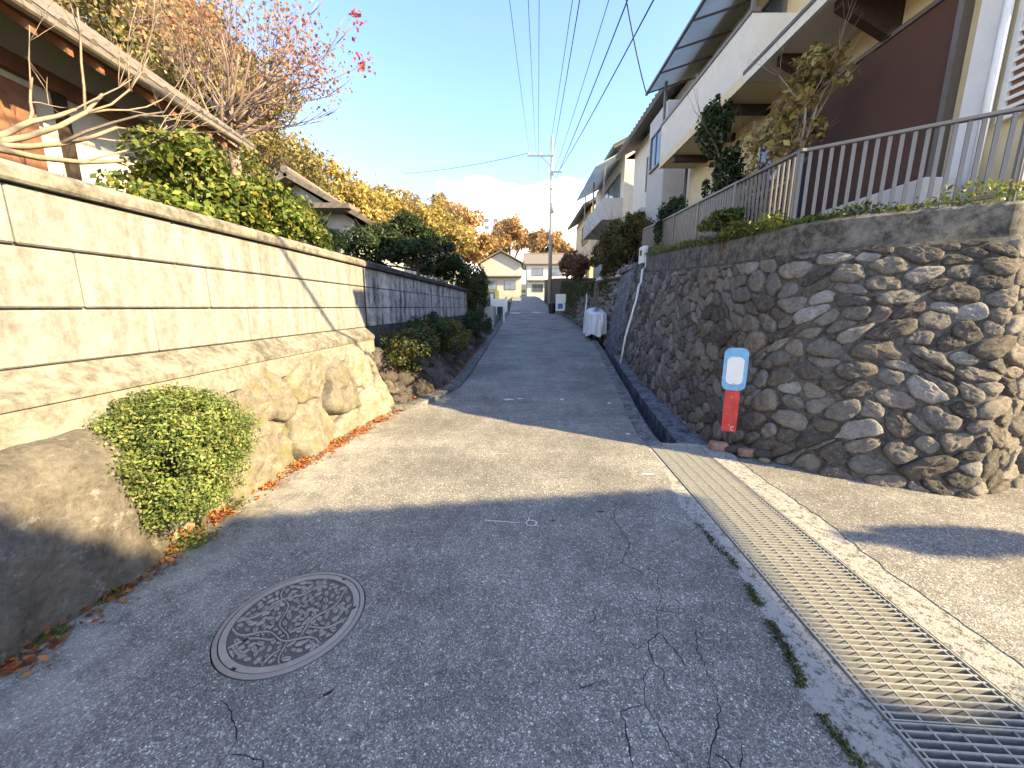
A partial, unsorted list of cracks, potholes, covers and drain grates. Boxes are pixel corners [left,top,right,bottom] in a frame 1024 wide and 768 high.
crack [211,699,264,768]
drain grate [743,553,1024,730]
drain grate [683,483,834,557]
drain grate [888,720,1024,768]
crack [576,502,743,768]
drain grate [650,445,746,485]
manhole cover [211,572,365,681]
